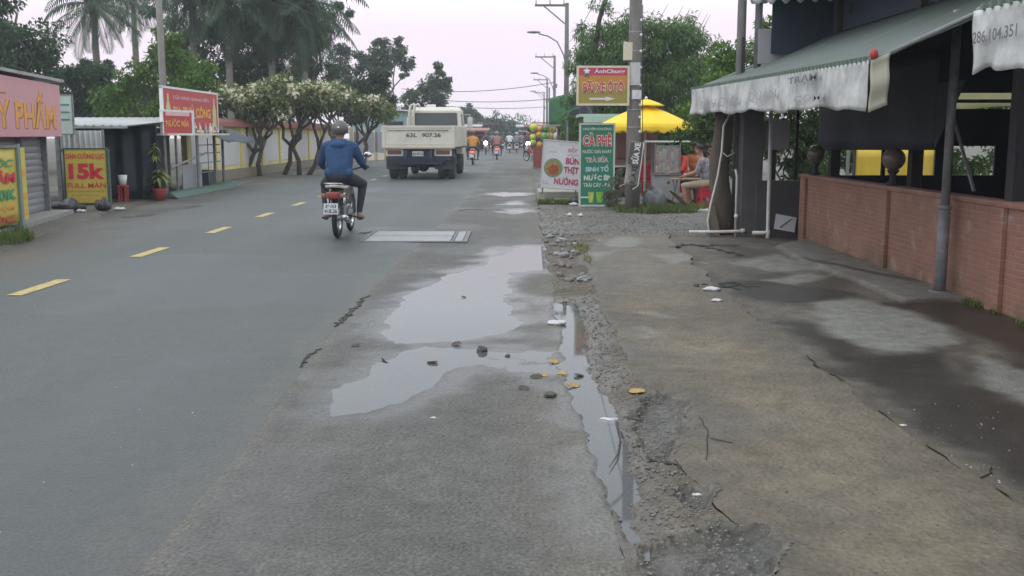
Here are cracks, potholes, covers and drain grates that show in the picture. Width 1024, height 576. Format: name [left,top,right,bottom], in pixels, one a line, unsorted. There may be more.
manhole cover [359,231,471,243]
pothole [624,390,692,463]
pothole [664,480,723,509]
crack [807,355,846,383]
crack [674,243,743,256]
crack [878,410,1015,502]
crack [699,417,733,459]
pothole [636,520,794,576]
